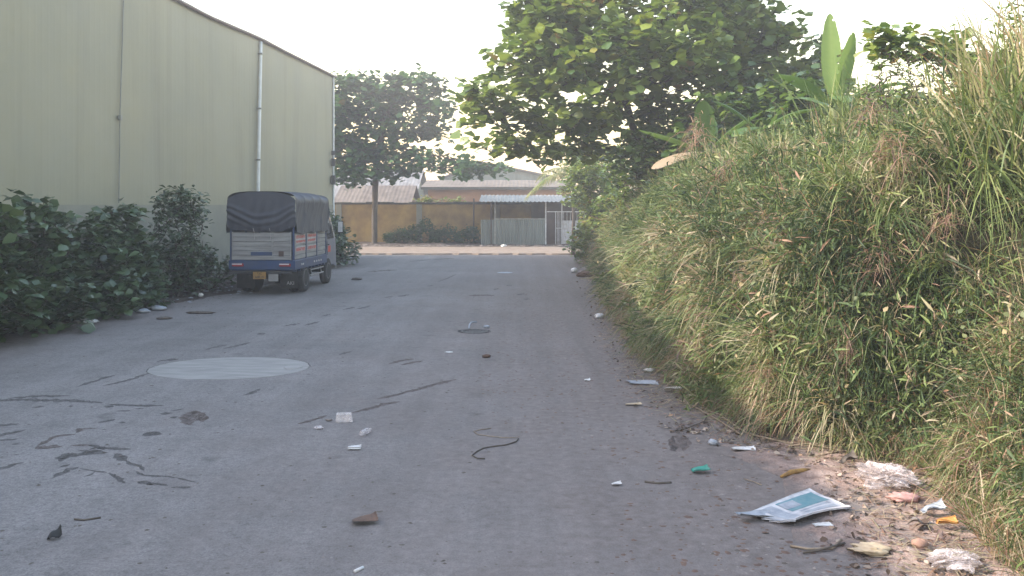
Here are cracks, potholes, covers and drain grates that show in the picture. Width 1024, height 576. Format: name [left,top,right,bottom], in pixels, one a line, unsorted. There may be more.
crack [0,395,197,489]
crack [298,359,457,424]
pothole [178,410,209,425]
